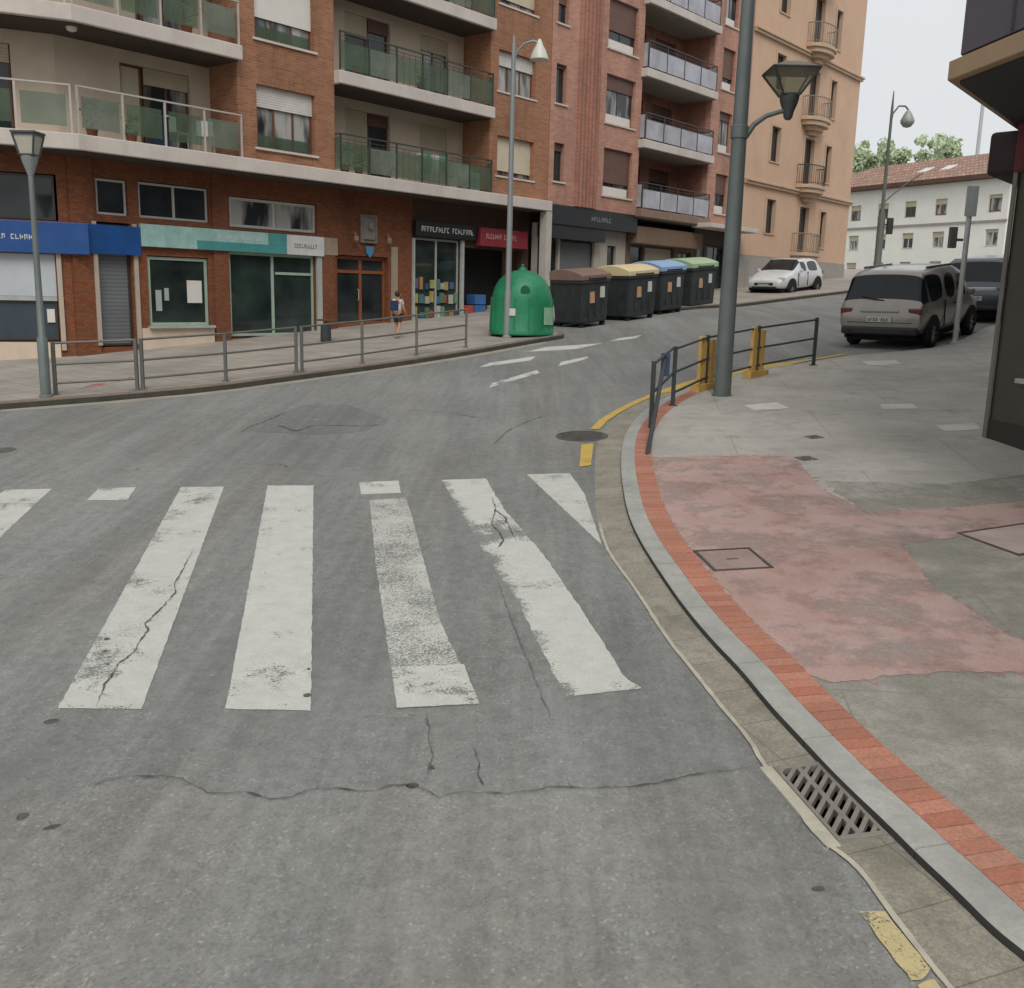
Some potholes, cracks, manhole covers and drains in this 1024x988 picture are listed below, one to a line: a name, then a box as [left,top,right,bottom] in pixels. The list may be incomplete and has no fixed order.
manhole cover [556,431,608,442]
crack [240,413,376,432]
crack [489,497,519,547]
crack [72,714,744,799]
crack [96,549,193,707]
utility cover [957,523,1024,556]
utility cover [693,547,774,571]
